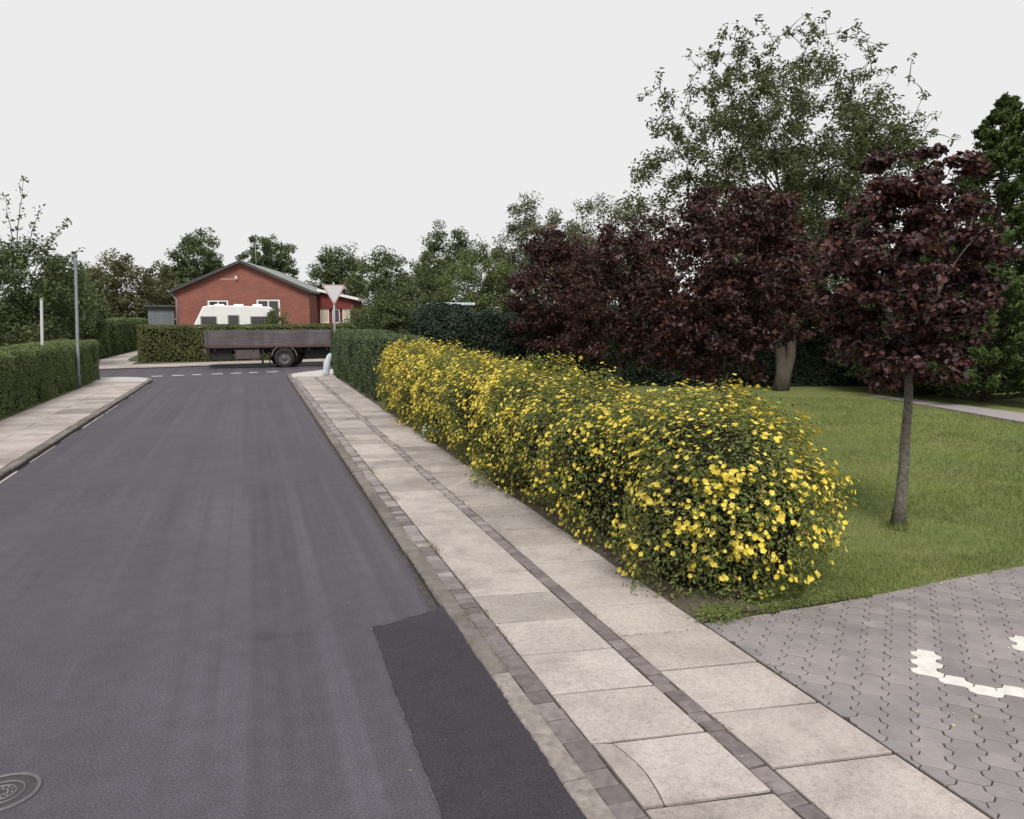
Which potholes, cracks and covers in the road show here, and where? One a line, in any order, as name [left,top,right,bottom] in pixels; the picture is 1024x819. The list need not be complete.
manhole cover [0,772,42,812]
